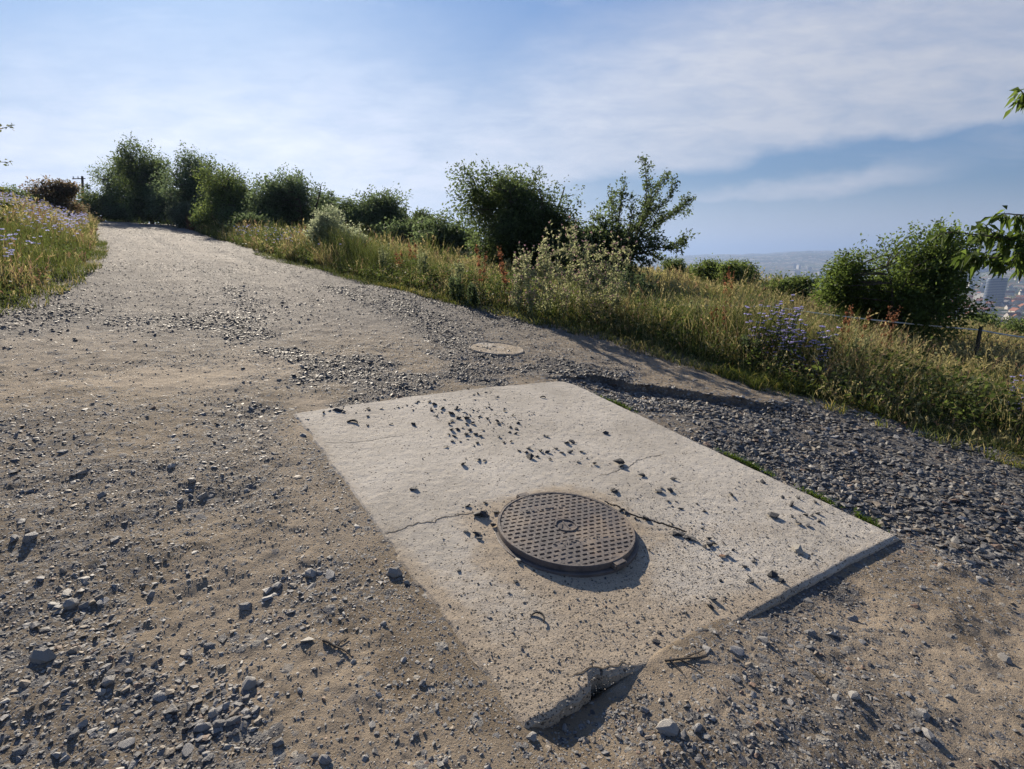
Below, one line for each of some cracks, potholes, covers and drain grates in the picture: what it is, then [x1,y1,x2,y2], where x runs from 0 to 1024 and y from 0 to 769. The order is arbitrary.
crack [605,501,686,532]
crack [382,510,484,535]
manhole cover [468,342,524,356]
manhole cover [494,492,639,578]
